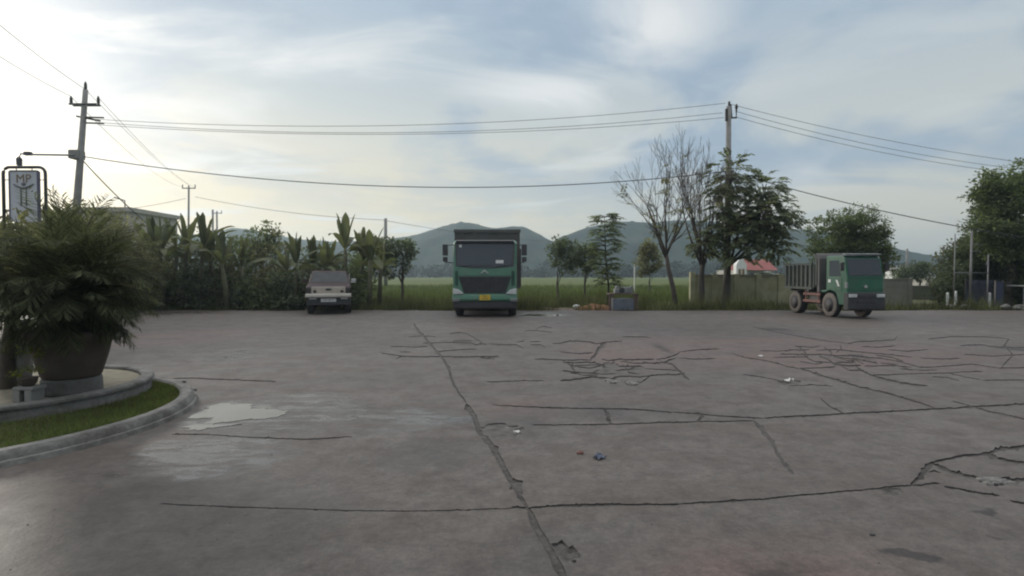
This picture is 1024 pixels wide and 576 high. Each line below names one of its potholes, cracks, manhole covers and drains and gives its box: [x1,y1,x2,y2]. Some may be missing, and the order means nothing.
crack [953,401,1024,419]
pothole [551,540,581,564]
crack [391,324,794,576]
crack [910,445,1024,504]
crack [742,336,1024,386]
